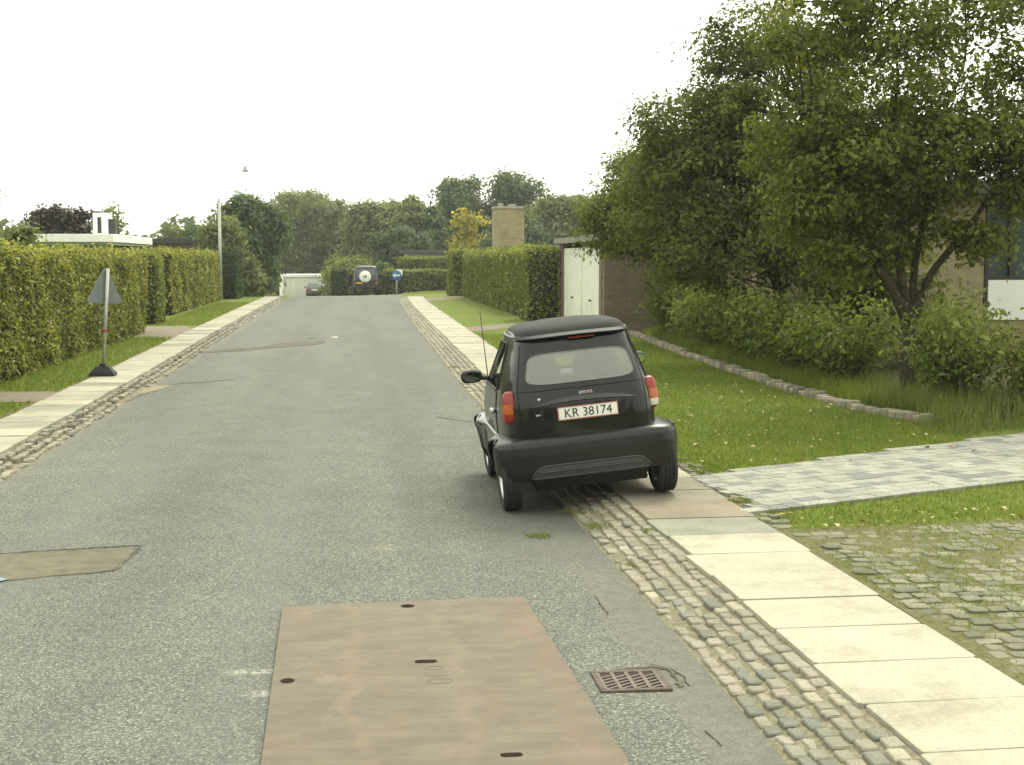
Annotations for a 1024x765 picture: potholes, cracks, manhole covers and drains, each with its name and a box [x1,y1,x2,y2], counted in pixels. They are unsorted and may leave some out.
drain grate [590,665,684,693]
